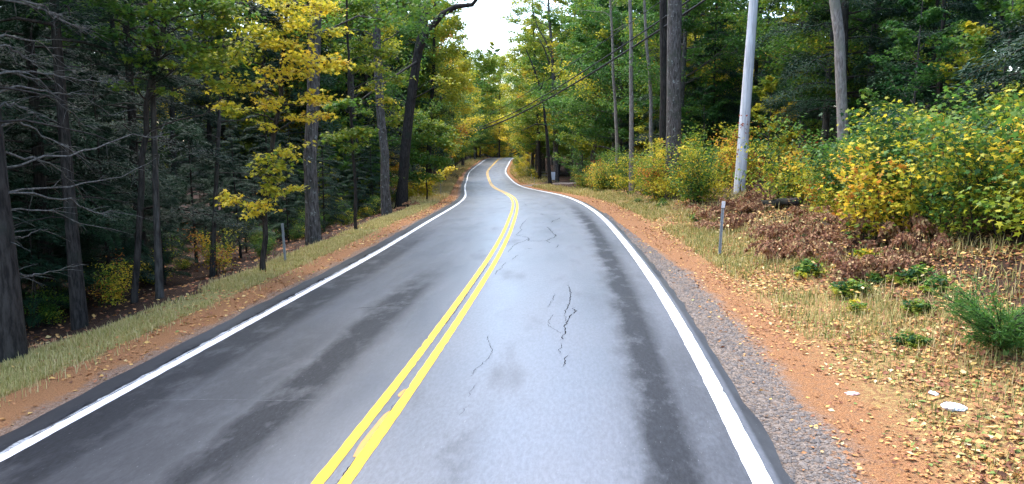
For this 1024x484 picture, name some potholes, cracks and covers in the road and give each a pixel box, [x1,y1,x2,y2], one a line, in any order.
crack [548,285,576,368]
